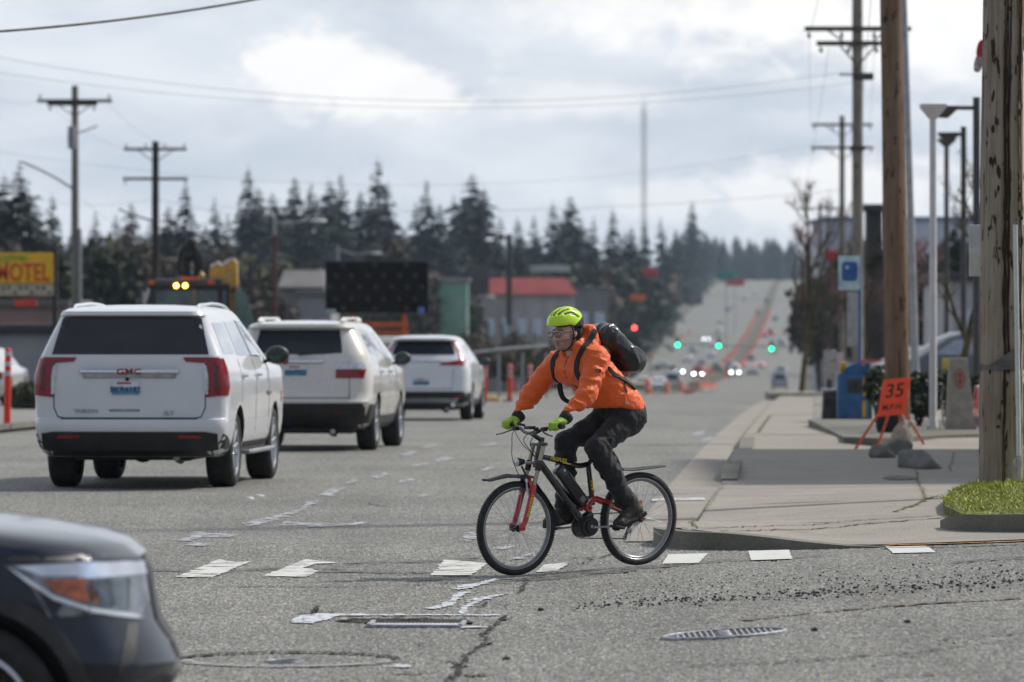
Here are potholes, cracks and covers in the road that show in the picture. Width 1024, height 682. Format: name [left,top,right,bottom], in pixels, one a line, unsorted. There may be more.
drain grate [365,620,473,628]
crack [443,553,612,681]
